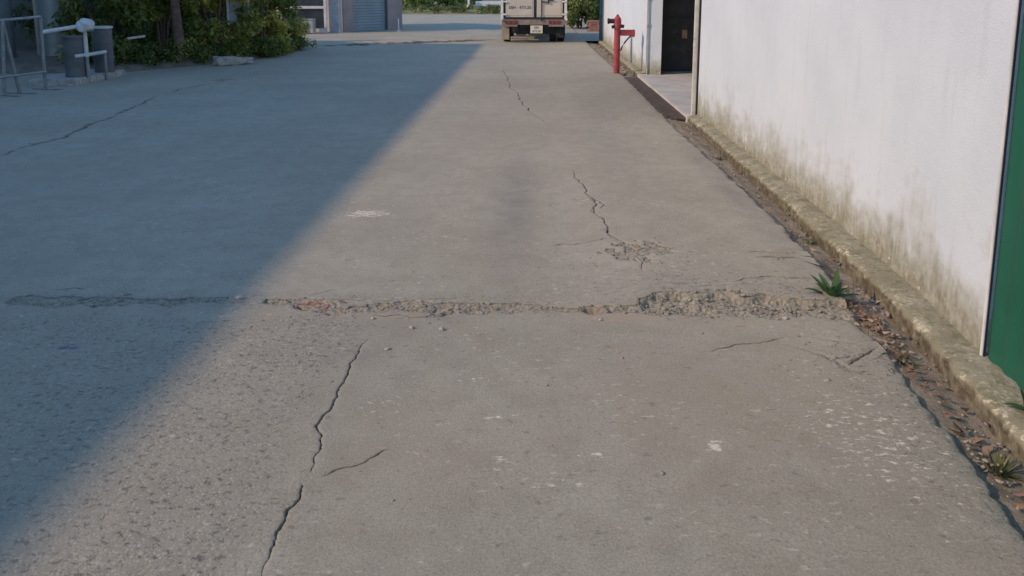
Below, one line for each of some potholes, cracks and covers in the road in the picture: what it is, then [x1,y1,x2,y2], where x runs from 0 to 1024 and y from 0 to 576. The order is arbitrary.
pothole [264,299,579,317]
crack [685,330,894,377]
crack [495,67,564,131]
crack [540,165,664,286]
pothole [579,307,610,315]
crack [247,311,435,576]
pothole [604,290,856,324]
pothole [600,242,673,262]
crack [0,82,224,162]
